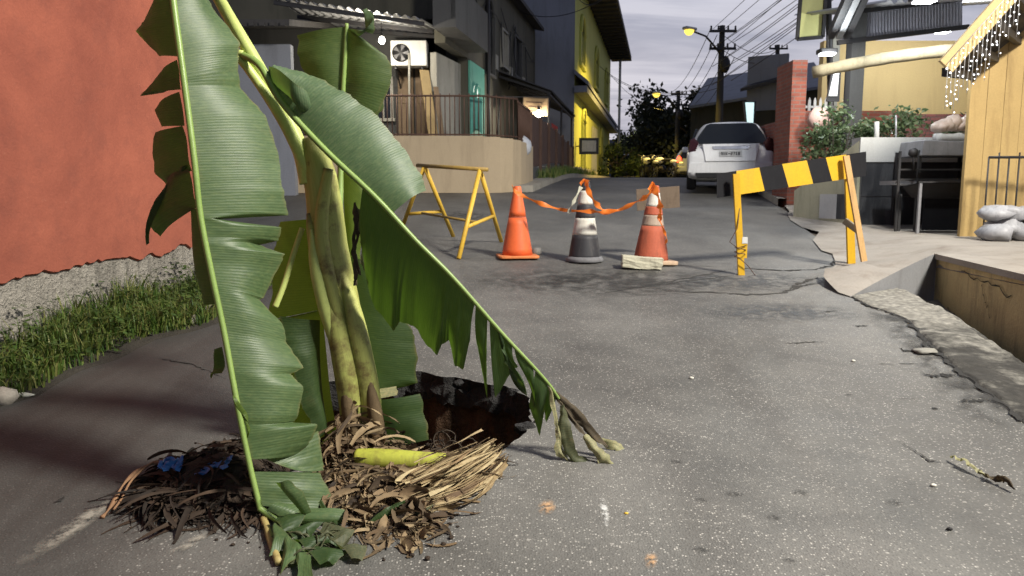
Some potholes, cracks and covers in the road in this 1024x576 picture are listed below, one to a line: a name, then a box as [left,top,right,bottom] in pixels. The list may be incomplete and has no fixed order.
crack [162,358,226,379]
crack [600,260,835,294]
pothole [322,371,532,453]
